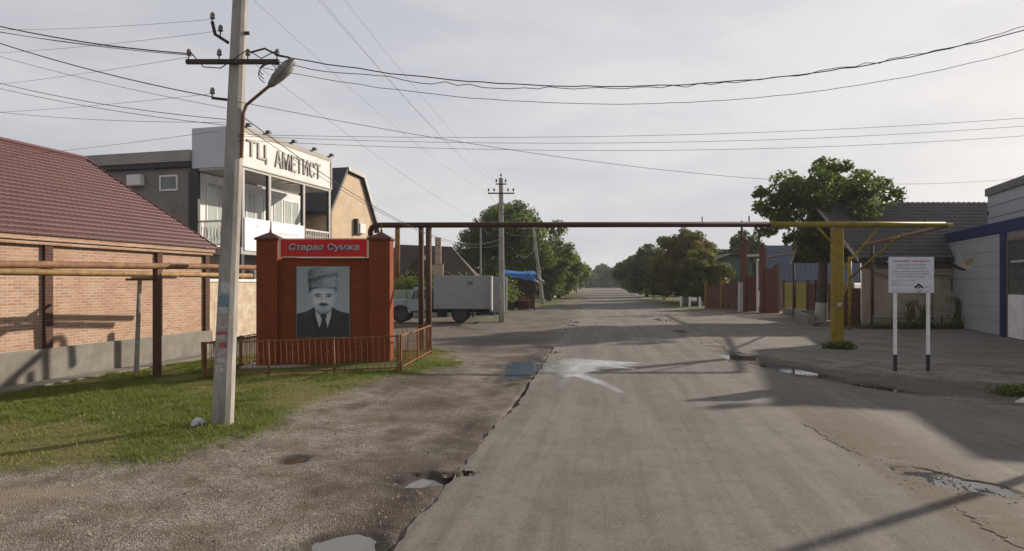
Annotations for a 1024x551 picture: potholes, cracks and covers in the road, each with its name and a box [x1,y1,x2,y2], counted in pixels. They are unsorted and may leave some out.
crack [924,506,1024,549]
pothole [441,467,481,483]
crack [797,423,881,458]
pothole [855,454,1024,504]
